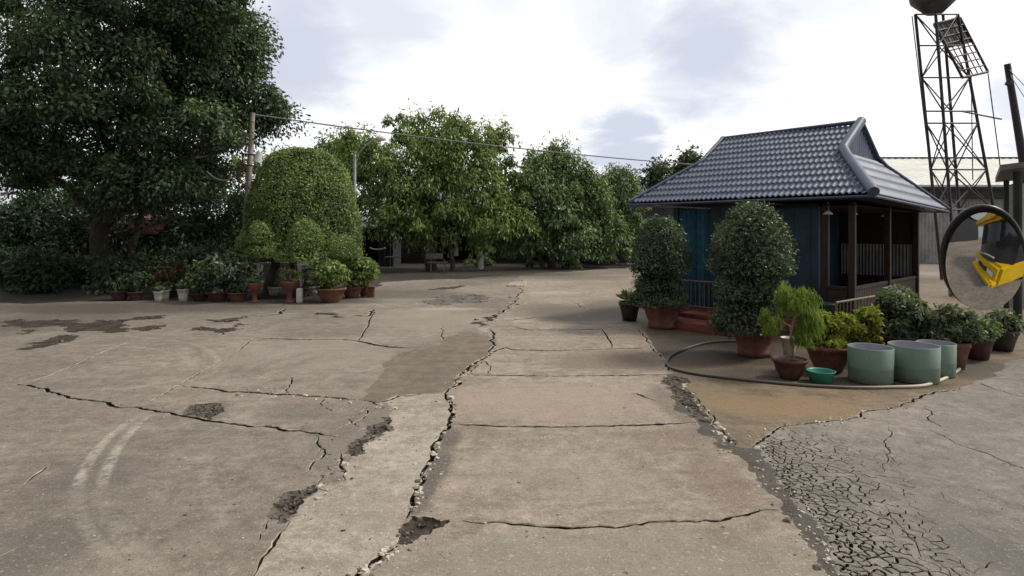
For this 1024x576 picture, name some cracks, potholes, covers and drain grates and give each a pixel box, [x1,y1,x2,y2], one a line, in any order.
pothole [397,516,450,545]
crack [457,329,1024,576]
pothole [182,403,225,420]
pothole [345,417,393,456]
crack [17,280,533,576]
pothole [266,485,318,524]
